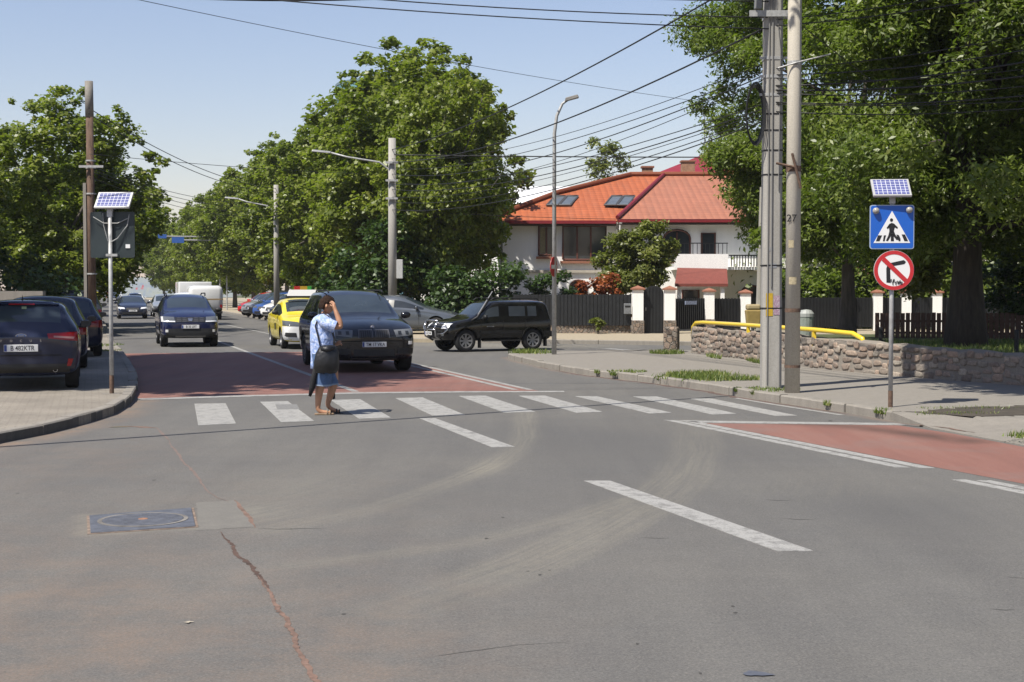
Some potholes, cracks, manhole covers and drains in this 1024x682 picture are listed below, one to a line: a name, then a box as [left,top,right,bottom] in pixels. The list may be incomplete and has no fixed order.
crack [117,426,322,682]
manhole cover [87,508,198,534]
